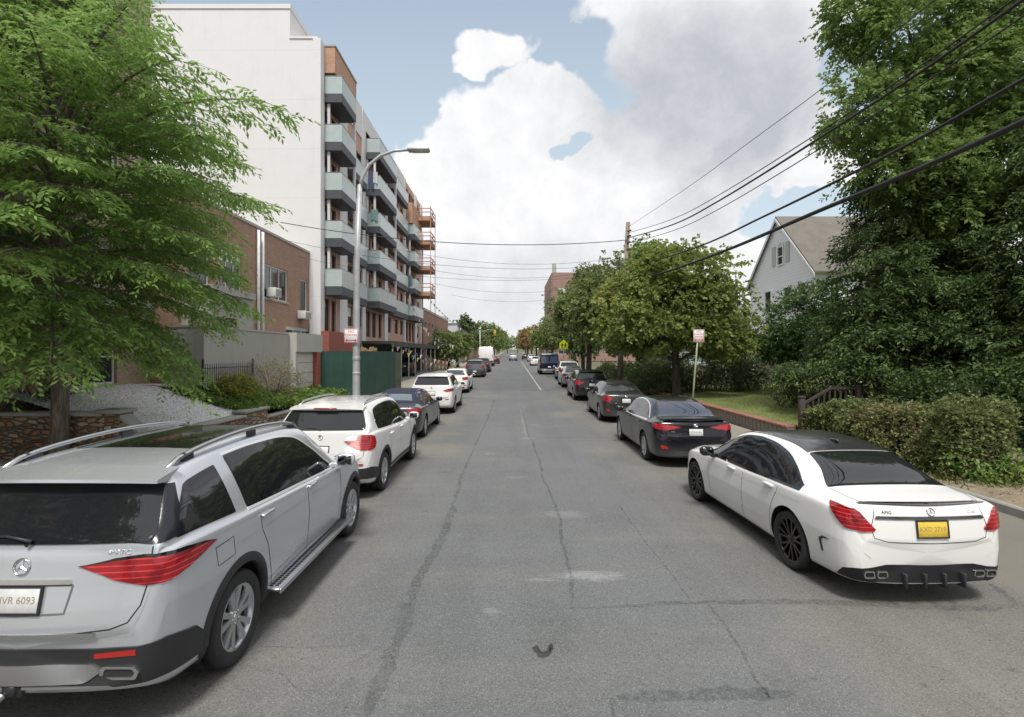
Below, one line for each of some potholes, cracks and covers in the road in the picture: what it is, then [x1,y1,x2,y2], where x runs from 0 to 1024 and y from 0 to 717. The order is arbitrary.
pothole [532,643,554,658]
